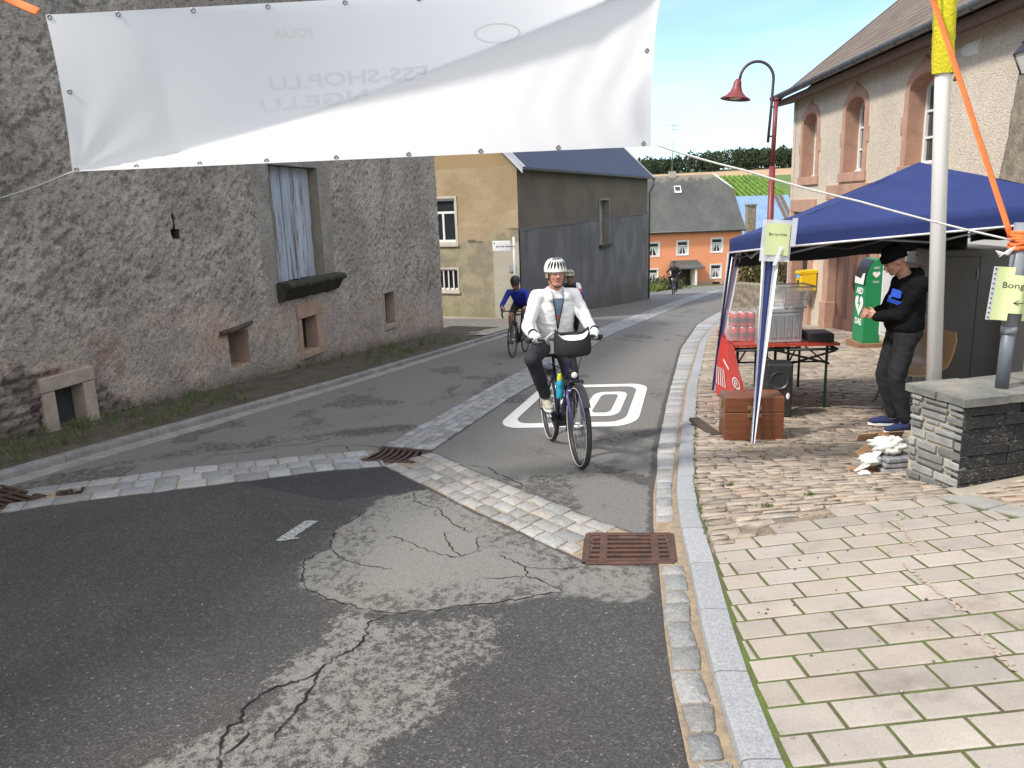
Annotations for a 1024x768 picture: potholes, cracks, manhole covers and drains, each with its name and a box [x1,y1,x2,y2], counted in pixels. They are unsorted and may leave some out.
drain grate [0,485,47,510]
crack [216,491,579,768]
drain grate [359,446,432,463]
drain grate [582,532,678,565]
